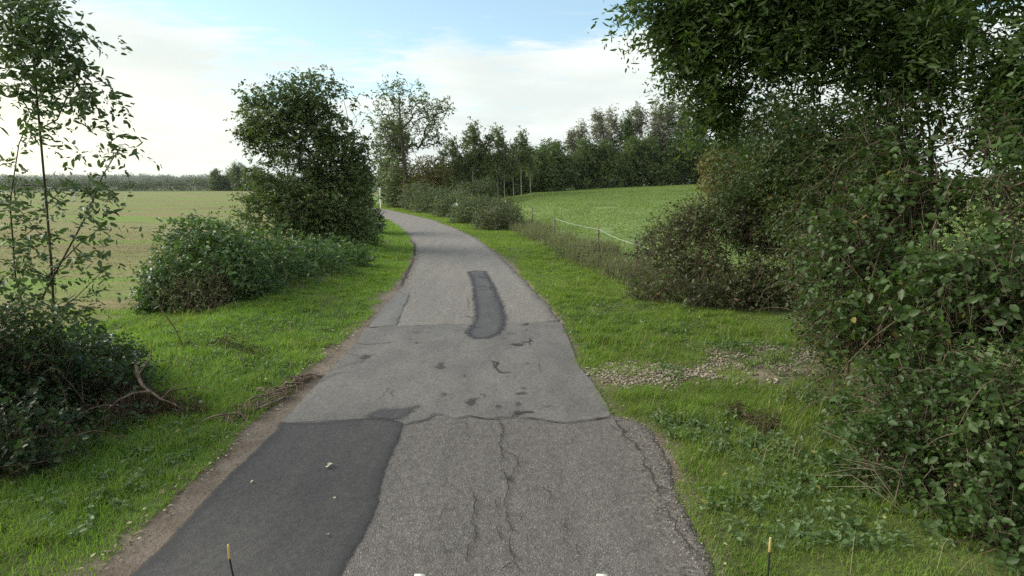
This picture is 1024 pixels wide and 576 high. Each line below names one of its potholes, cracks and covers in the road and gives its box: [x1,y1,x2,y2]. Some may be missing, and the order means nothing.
crack [405,393,693,571]
